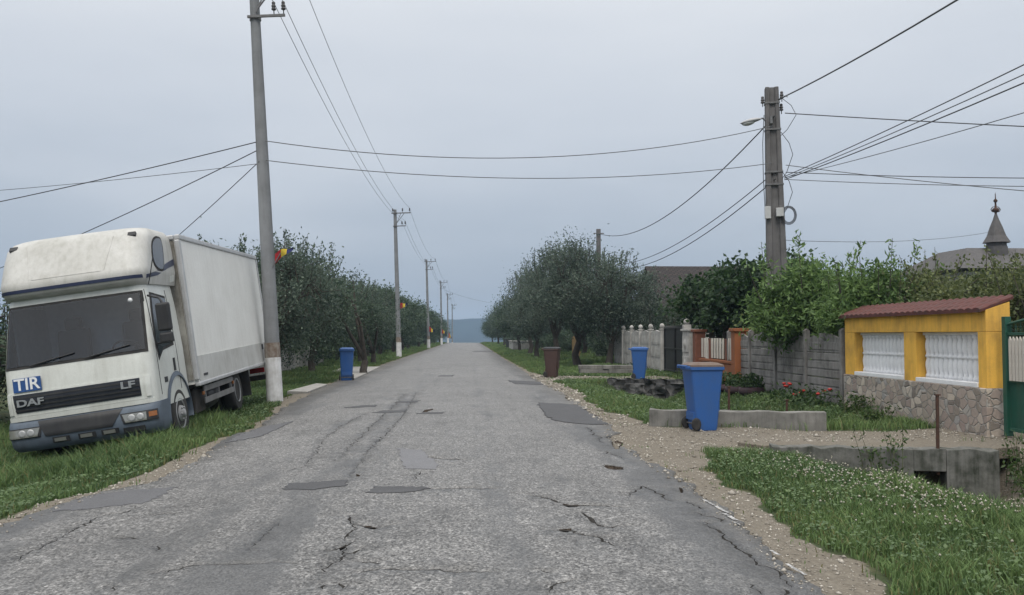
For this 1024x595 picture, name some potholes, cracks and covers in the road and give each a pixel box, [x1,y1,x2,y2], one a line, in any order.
crack [20,510,131,559]
crack [531,495,617,546]
crack [315,516,463,589]
crack [686,502,792,595]
